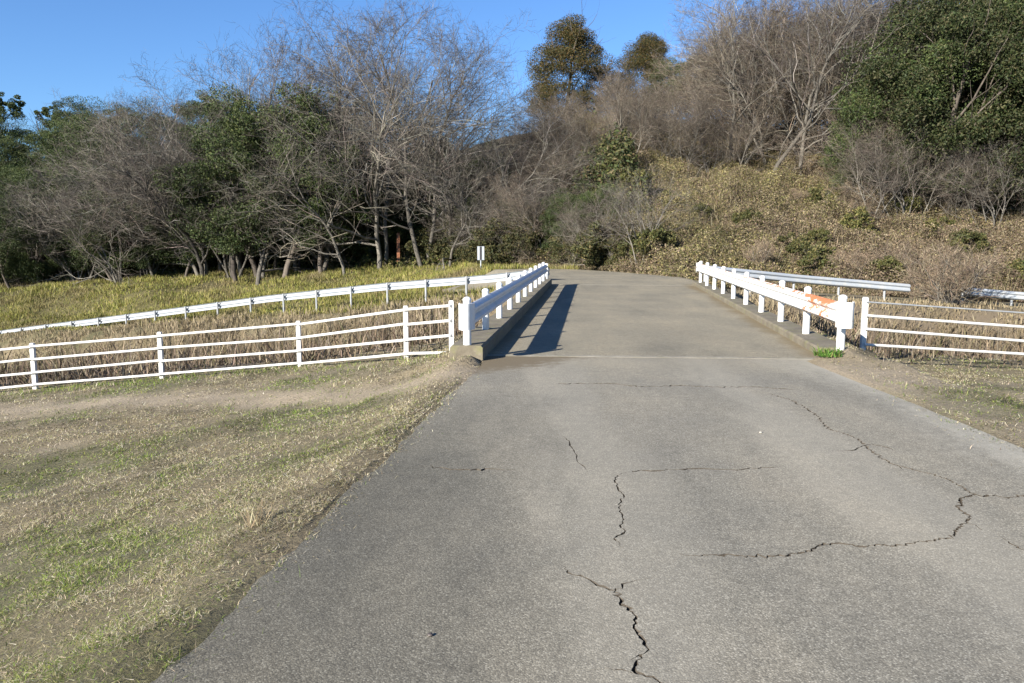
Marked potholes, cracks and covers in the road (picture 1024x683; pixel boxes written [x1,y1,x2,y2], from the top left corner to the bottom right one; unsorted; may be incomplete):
crack [564,566,661,683]
crack [559,383,1024,558]
